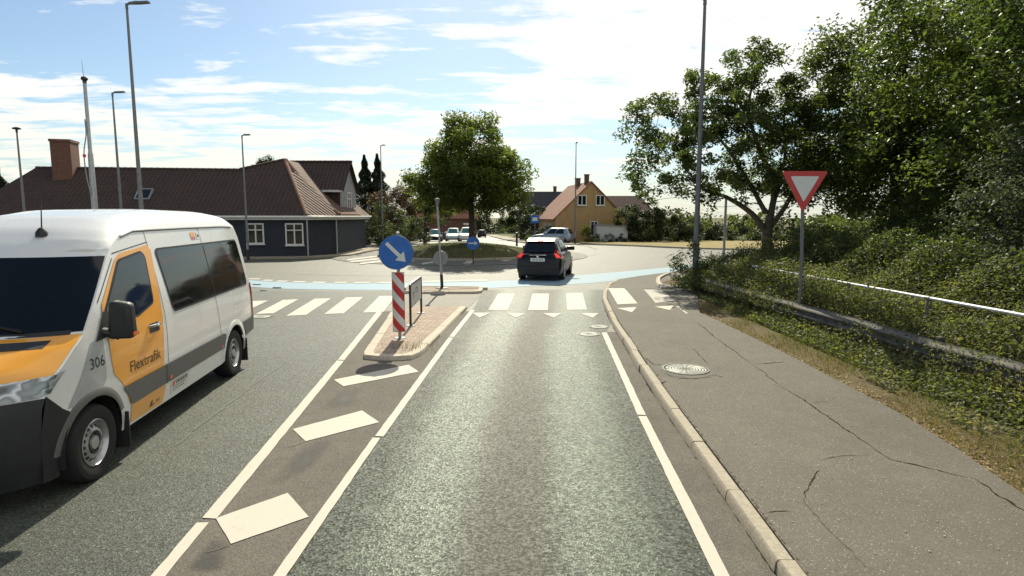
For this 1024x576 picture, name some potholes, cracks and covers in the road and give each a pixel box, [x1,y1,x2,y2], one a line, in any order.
manhole cover [662,363,710,375]
crack [804,448,965,497]
